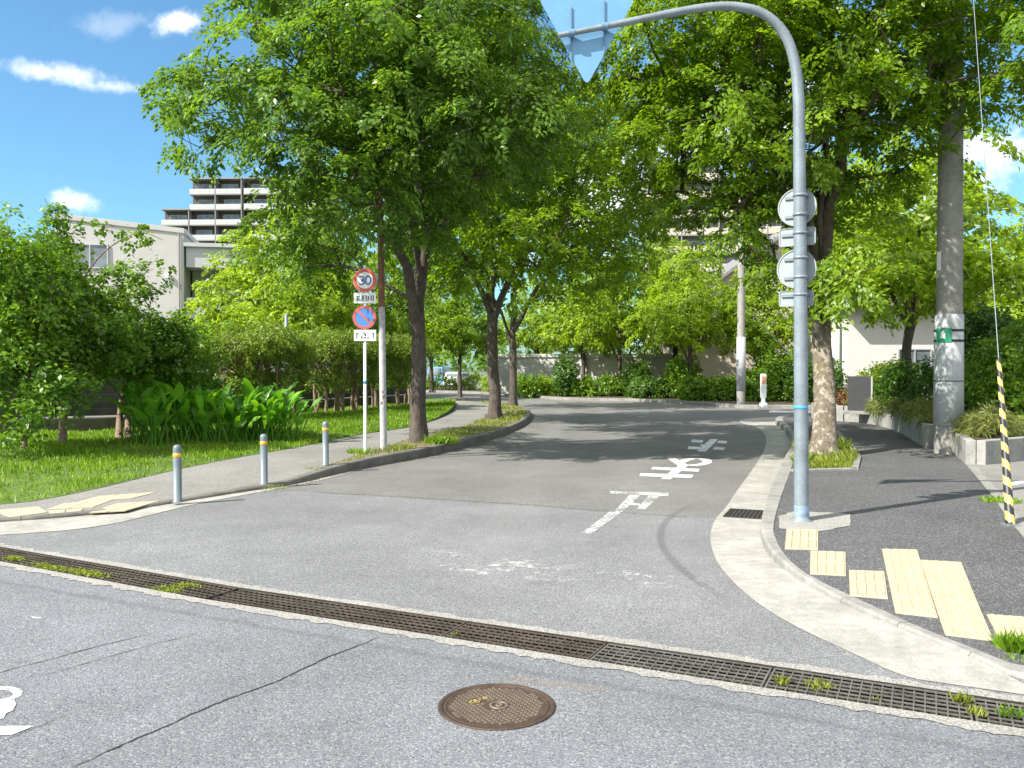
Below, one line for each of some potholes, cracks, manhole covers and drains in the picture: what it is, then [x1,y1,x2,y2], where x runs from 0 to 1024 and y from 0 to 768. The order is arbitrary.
drain grate [589,643,772,687]
manhole cover [438,683,556,731]
drain grate [443,623,606,660]
crack [74,638,375,767]
drain grate [210,589,345,617]
drain grate [0,550,75,569]
drain grate [116,574,237,599]
drain grate [973,698,1024,727]
drain grate [764,668,973,721]
crack [2,633,196,677]
drain grate [723,508,763,519]
drain grate [43,561,150,583]
